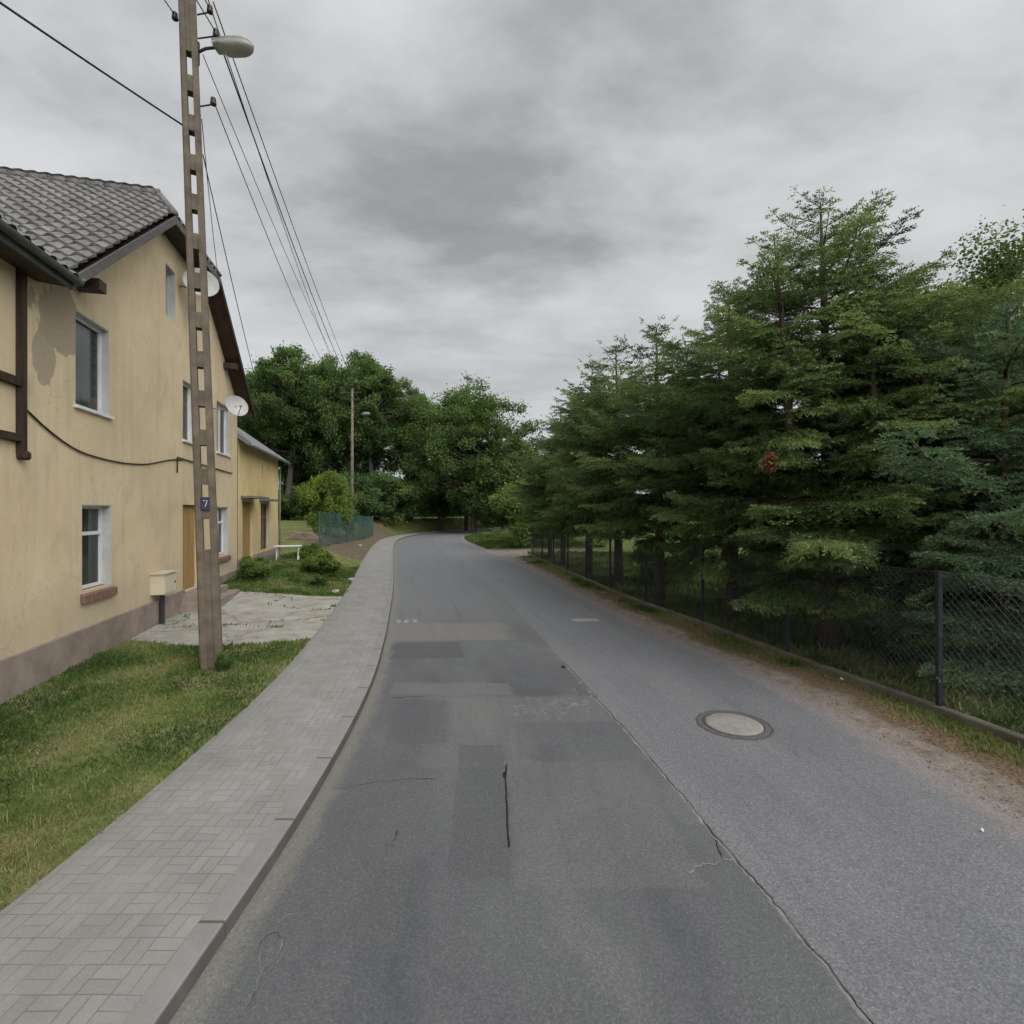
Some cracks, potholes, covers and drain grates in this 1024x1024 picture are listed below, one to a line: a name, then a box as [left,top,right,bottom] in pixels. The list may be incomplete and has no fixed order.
manhole cover [695,710,775,741]
